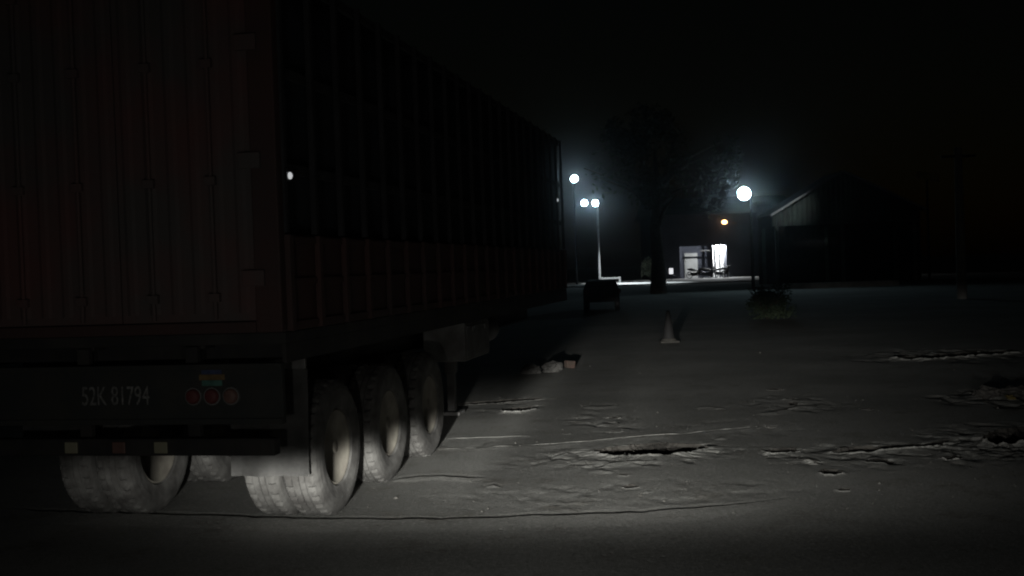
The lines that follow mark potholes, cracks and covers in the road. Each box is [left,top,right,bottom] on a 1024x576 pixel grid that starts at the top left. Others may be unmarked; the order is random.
pothole [570,439,729,461]
crack [694,399,820,415]
pothole [811,467,850,477]
pothole [493,405,543,414]
